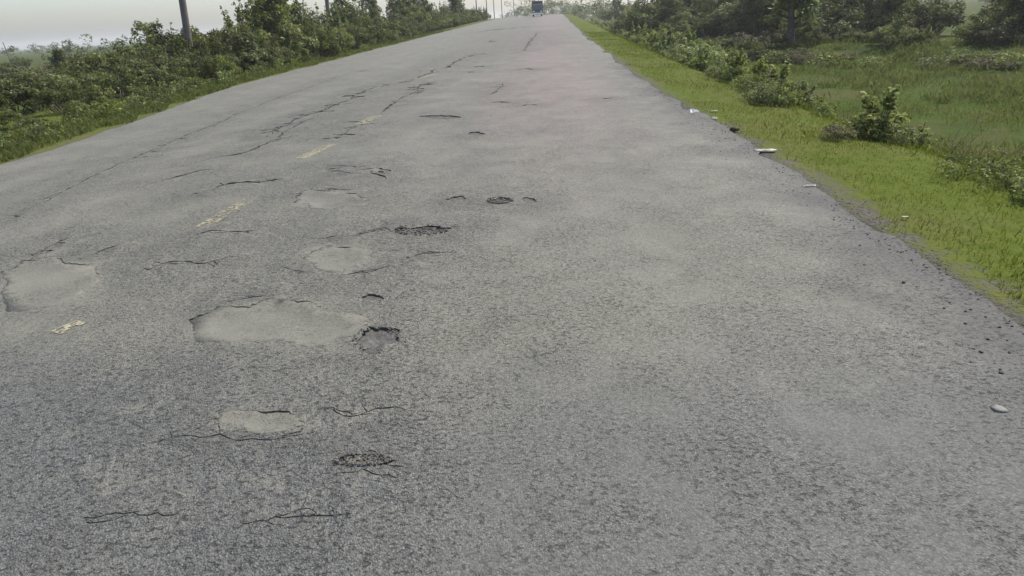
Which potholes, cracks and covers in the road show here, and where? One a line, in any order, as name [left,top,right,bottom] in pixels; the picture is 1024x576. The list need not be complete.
pothole [394,224,452,235]
pothole [352,325,401,354]
crack [143,256,235,272]
crack [198,26,539,162]
crack [8,84,319,217]
pothole [487,196,513,204]
crack [243,508,347,525]
crack [80,509,180,524]
pothole [333,452,394,465]
crack [157,405,409,447]
